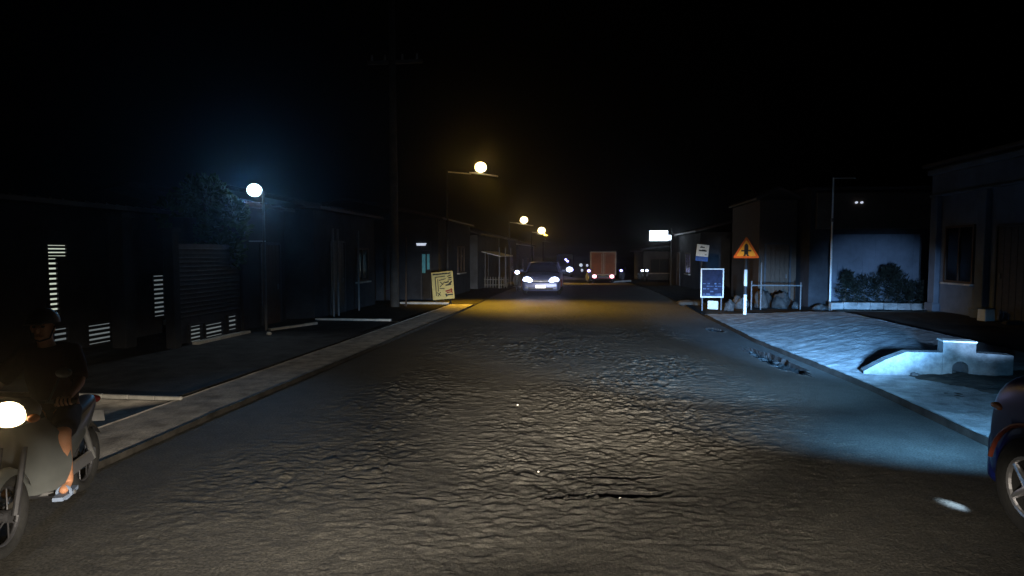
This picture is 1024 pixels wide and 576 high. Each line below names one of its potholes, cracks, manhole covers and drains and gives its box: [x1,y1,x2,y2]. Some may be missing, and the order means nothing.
pothole [740,347,814,378]
